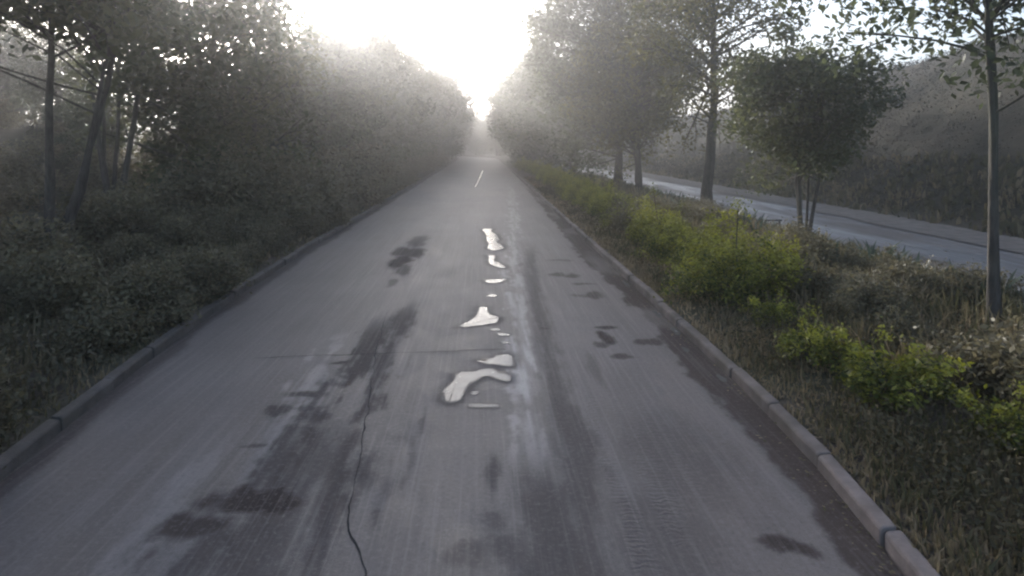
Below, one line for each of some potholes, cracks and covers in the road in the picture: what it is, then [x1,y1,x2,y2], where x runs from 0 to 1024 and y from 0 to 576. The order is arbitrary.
crack [266,318,494,576]
